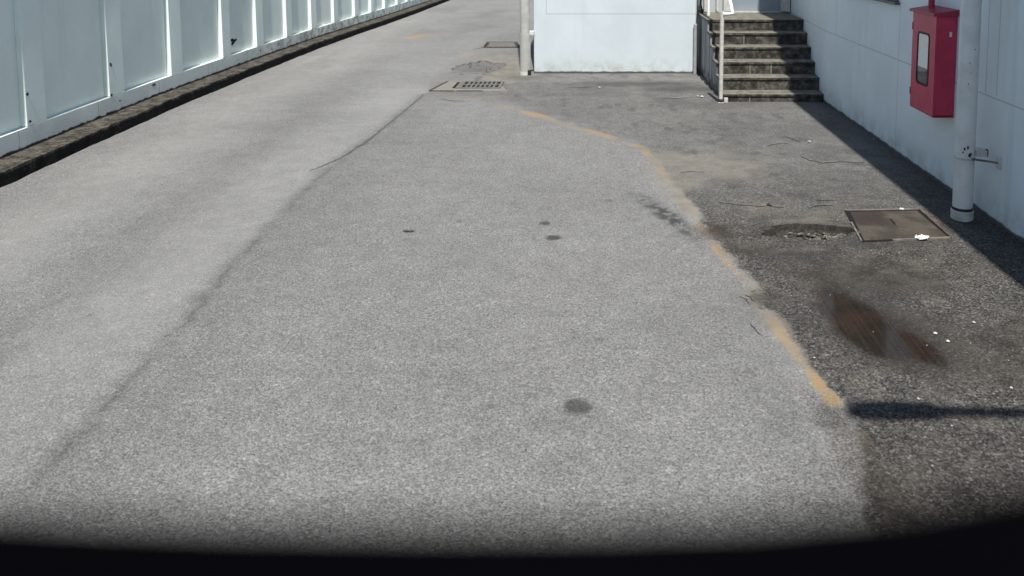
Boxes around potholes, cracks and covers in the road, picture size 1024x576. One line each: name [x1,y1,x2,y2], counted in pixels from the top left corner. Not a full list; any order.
pothole [754,222,860,244]
crack [769,136,865,163]
manhole cover [844,208,952,243]
drain grate [428,81,507,91]
